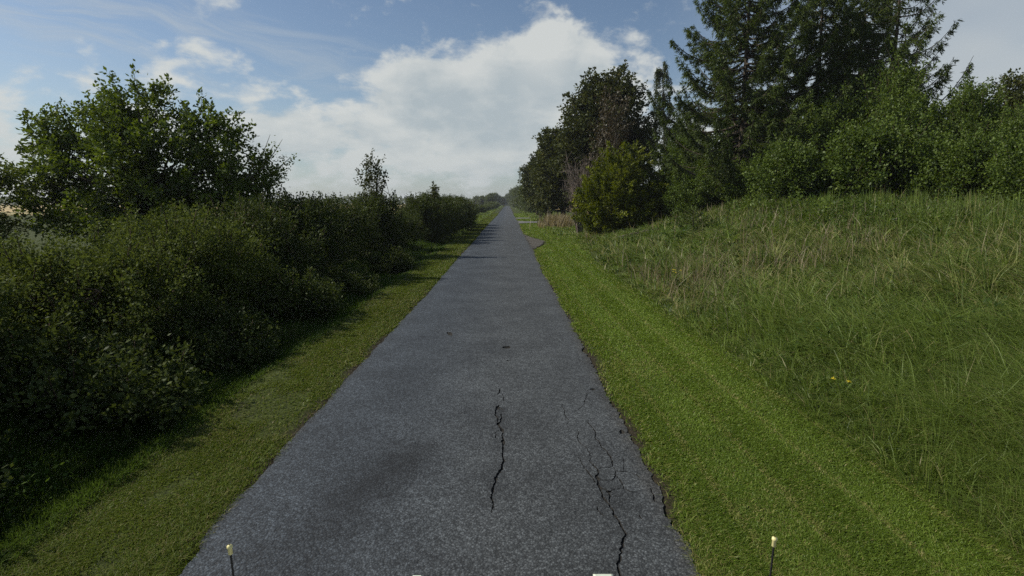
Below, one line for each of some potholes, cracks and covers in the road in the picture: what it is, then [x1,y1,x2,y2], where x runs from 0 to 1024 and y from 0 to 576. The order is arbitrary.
crack [561,393,655,576]
crack [490,389,505,513]
